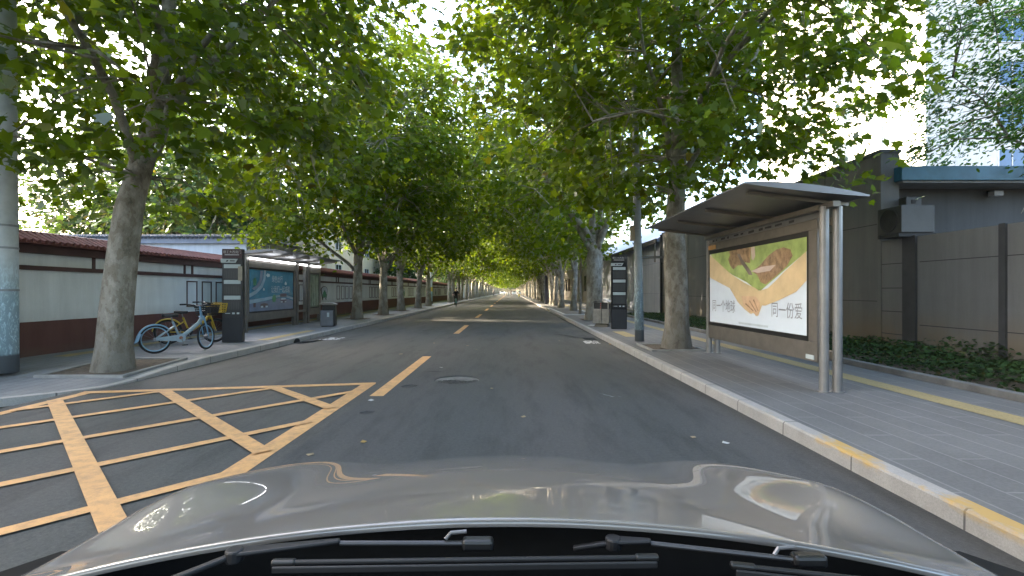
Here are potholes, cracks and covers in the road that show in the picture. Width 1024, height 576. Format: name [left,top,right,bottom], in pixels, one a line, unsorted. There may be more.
manhole cover [433,376,481,384]
